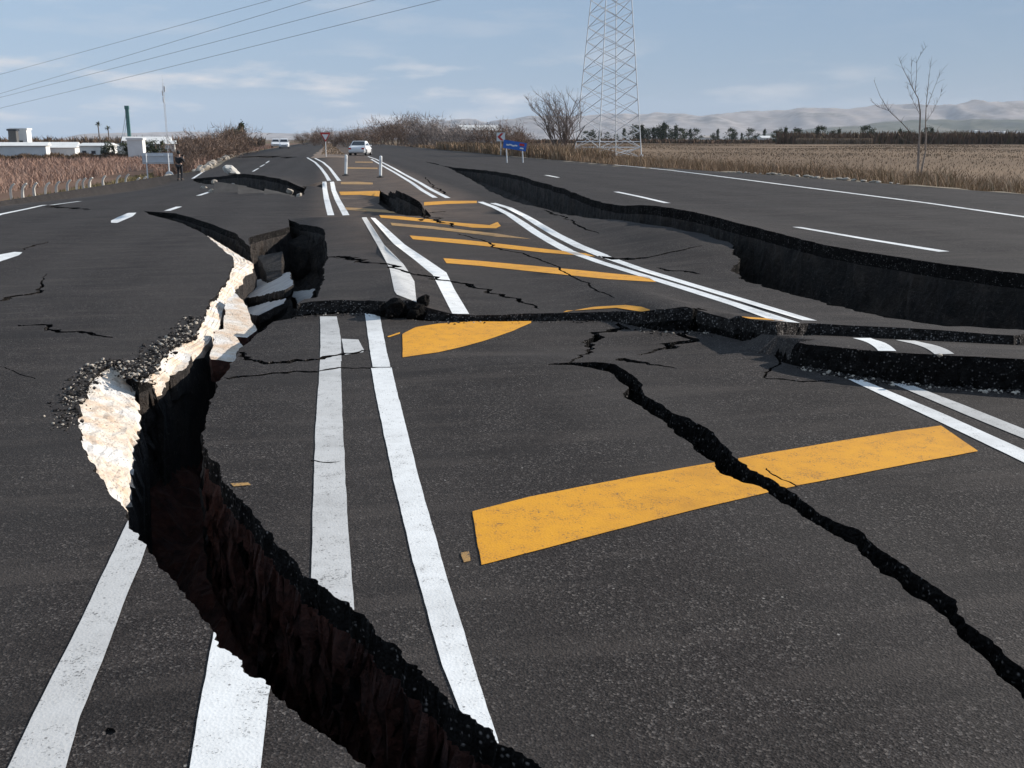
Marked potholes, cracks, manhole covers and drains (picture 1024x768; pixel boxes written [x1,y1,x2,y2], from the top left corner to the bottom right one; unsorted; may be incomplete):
crack [0,275,46,301]
crack [18,324,114,338]
crack [226,350,390,379]
crack [297,177,1024,699]
